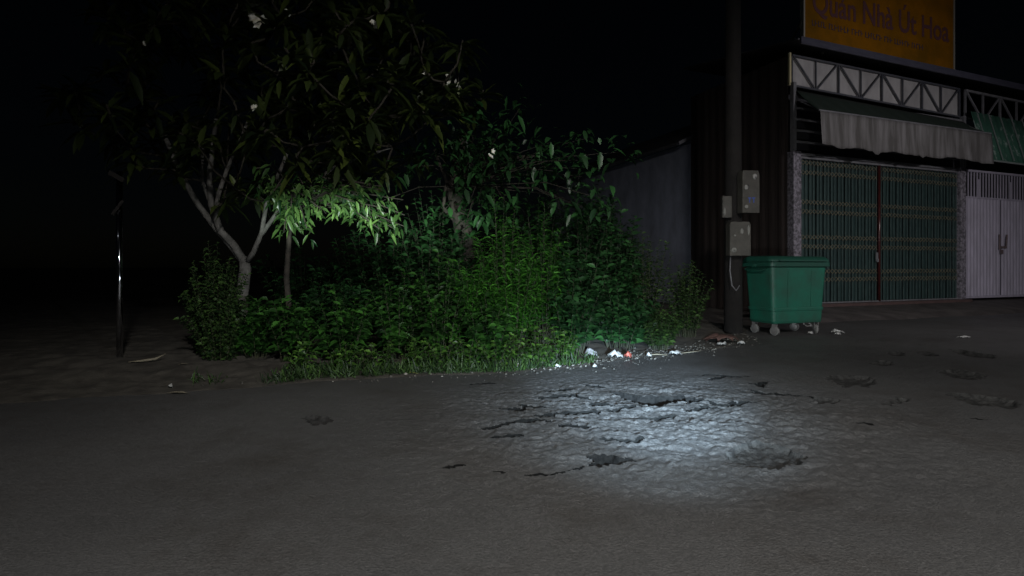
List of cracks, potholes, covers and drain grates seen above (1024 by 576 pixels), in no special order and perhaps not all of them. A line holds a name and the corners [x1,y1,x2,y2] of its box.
pothole [936,368,986,380]
pothole [301,415,334,426]
pothole [948,349,996,359]
pothole [586,454,637,468]
pothole [724,440,808,470]
crack [493,463,593,477]
pothole [822,375,878,388]
crack [481,374,814,443]
pothole [947,392,1020,409]
